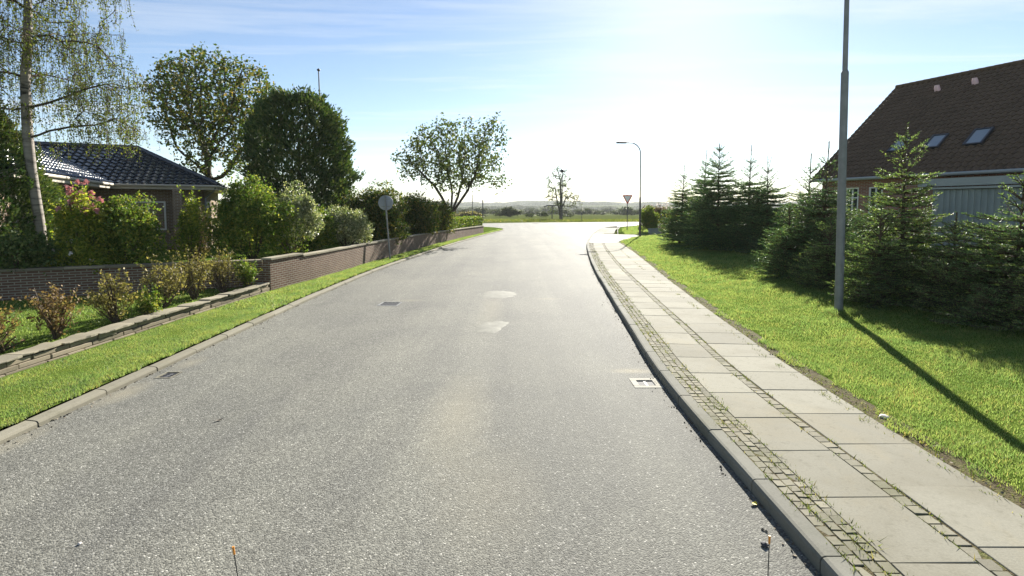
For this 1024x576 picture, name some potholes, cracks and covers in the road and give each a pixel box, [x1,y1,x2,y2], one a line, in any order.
drain grate [629,378,664,388]
